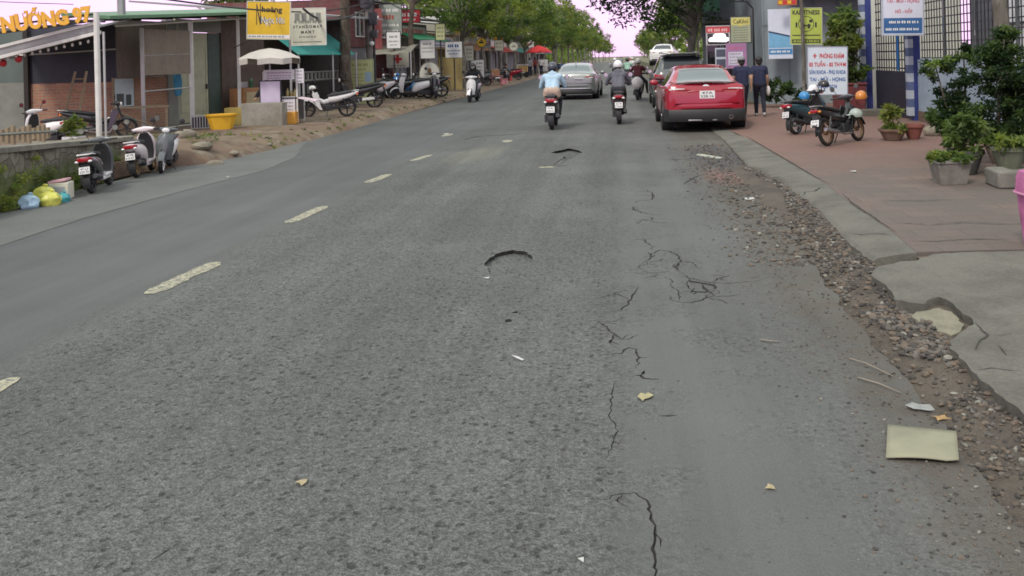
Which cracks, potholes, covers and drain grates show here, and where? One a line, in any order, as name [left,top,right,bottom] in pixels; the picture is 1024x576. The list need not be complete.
pothole [484,250,533,276]
crack [580,492,662,576]
crack [597,189,763,303]
pothole [551,148,581,165]
crack [975,322,1019,375]
crack [596,318,657,380]
